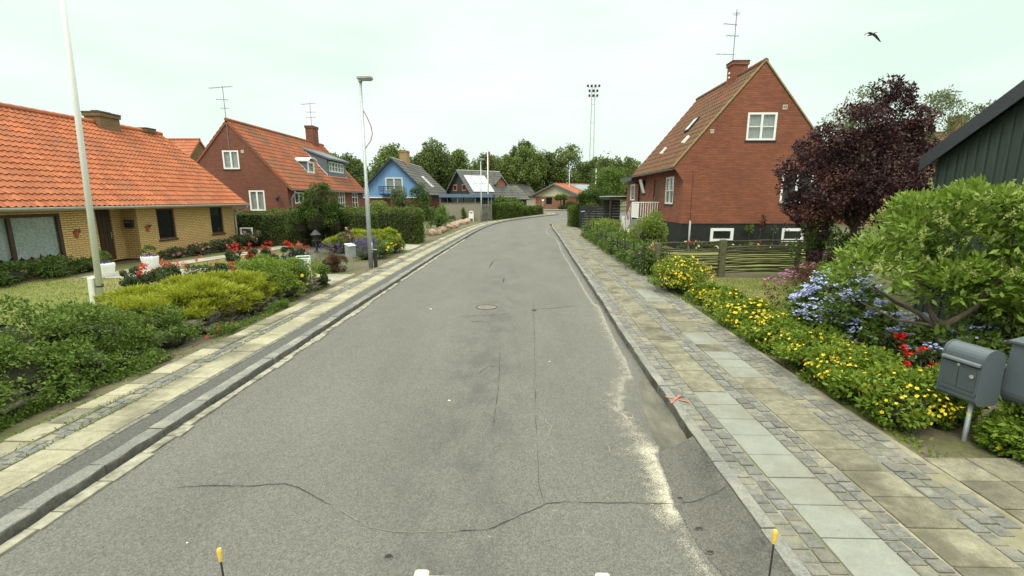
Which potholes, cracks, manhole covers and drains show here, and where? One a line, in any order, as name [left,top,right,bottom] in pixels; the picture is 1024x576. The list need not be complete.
pothole [640,378,687,451]
crack [173,483,670,533]
